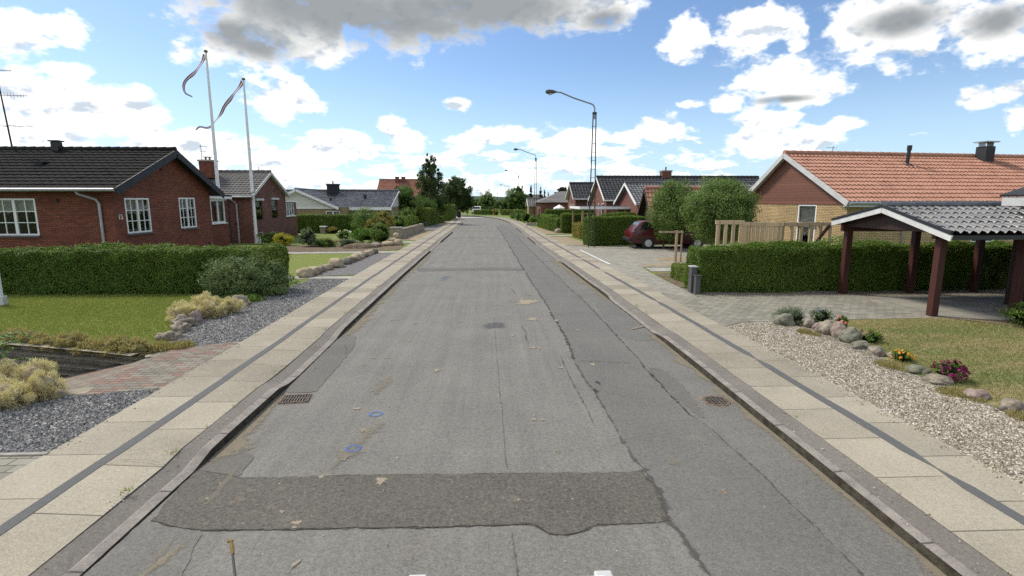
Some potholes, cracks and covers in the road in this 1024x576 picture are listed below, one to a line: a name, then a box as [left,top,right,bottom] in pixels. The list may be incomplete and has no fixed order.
crack [550,283,864,576]
drain grate [699,395,732,407]
drain grate [278,393,313,404]
